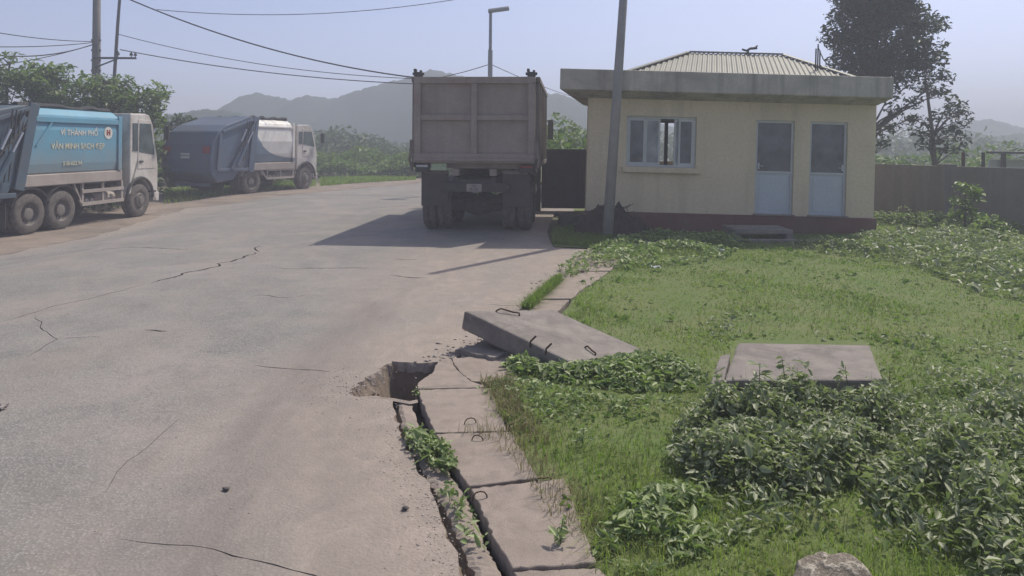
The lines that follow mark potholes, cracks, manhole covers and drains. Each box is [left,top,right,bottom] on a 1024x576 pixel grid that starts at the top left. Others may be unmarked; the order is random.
crack [105,418,180,493]
crack [124,539,317,576]
pothole [349,361,438,416]
crack [17,246,260,318]
